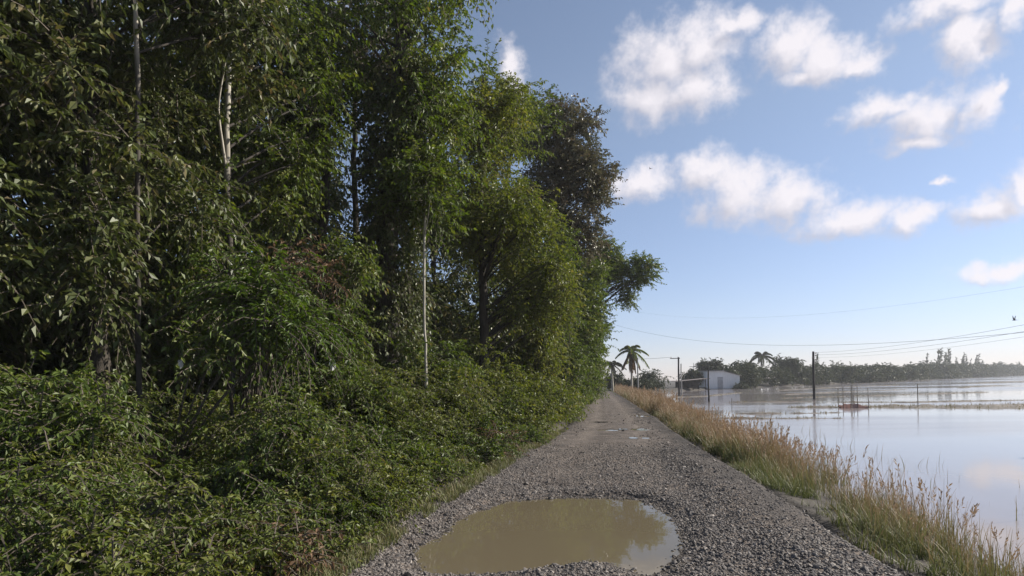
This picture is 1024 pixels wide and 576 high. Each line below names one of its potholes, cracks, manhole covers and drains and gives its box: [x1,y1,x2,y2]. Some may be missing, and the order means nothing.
pothole [401,494,695,576]
